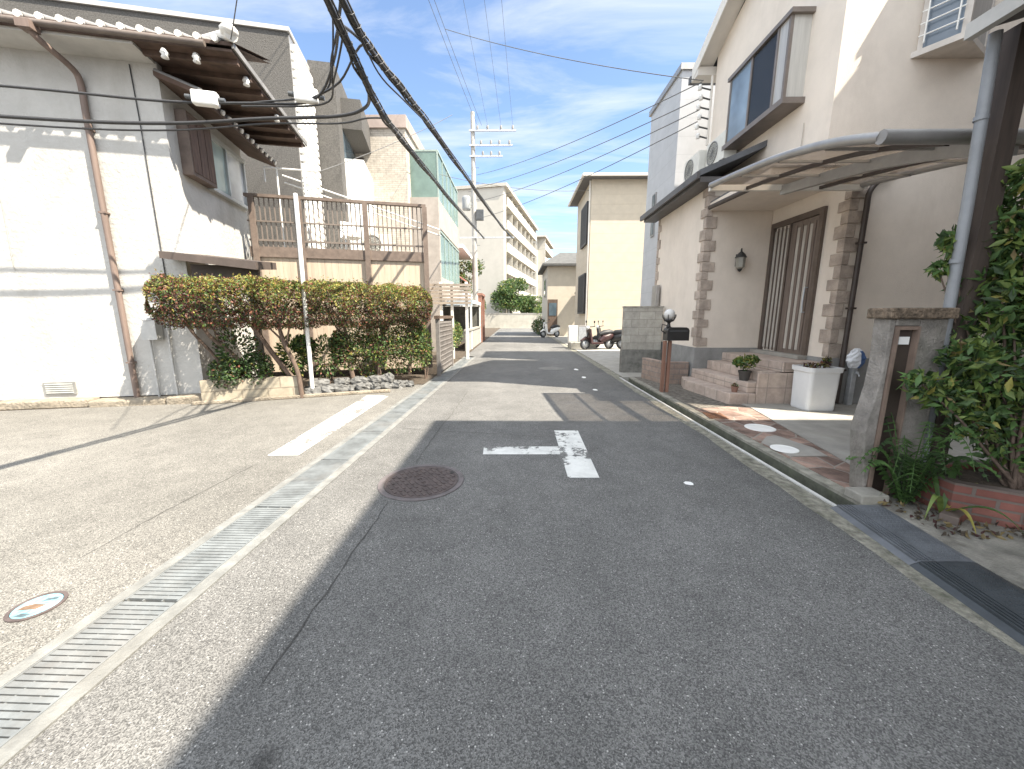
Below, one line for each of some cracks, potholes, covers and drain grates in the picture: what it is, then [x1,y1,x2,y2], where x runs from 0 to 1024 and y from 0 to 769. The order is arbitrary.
drain grate [0,601,175,748]
manhole cover [377,464,464,501]
utility cover [3,591,69,623]
